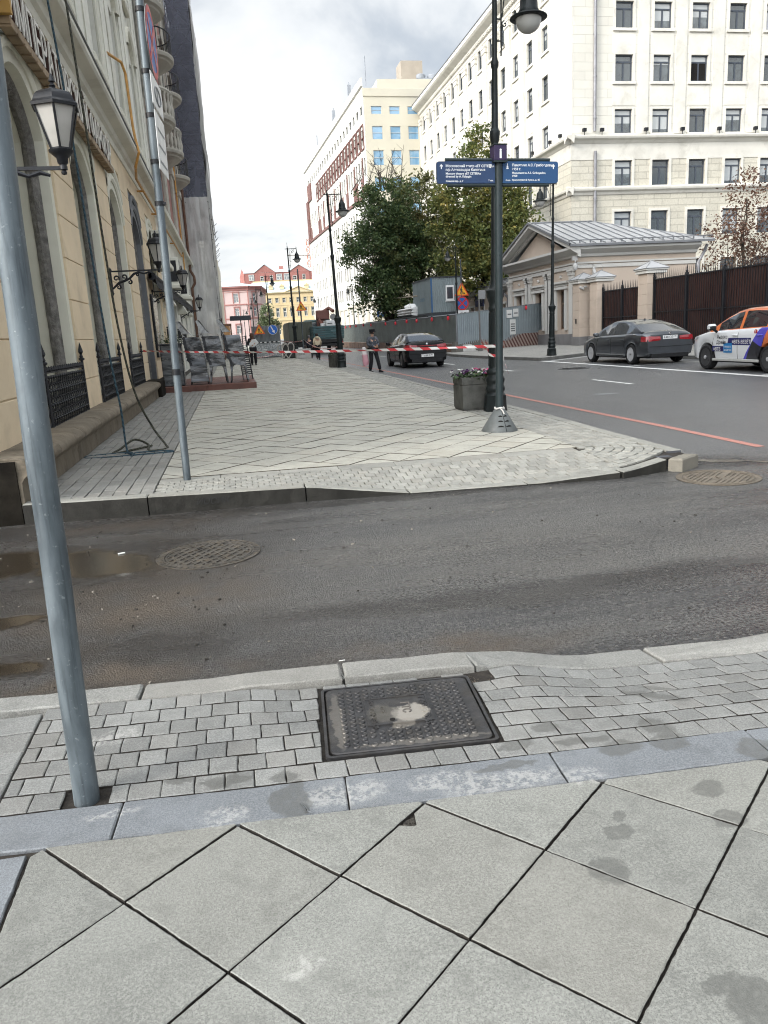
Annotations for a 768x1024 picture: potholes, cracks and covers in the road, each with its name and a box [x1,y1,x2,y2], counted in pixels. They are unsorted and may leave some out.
utility cover [321,675,499,762]
manhole cover [675,470,763,486]
manhole cover [156,539,261,570]
